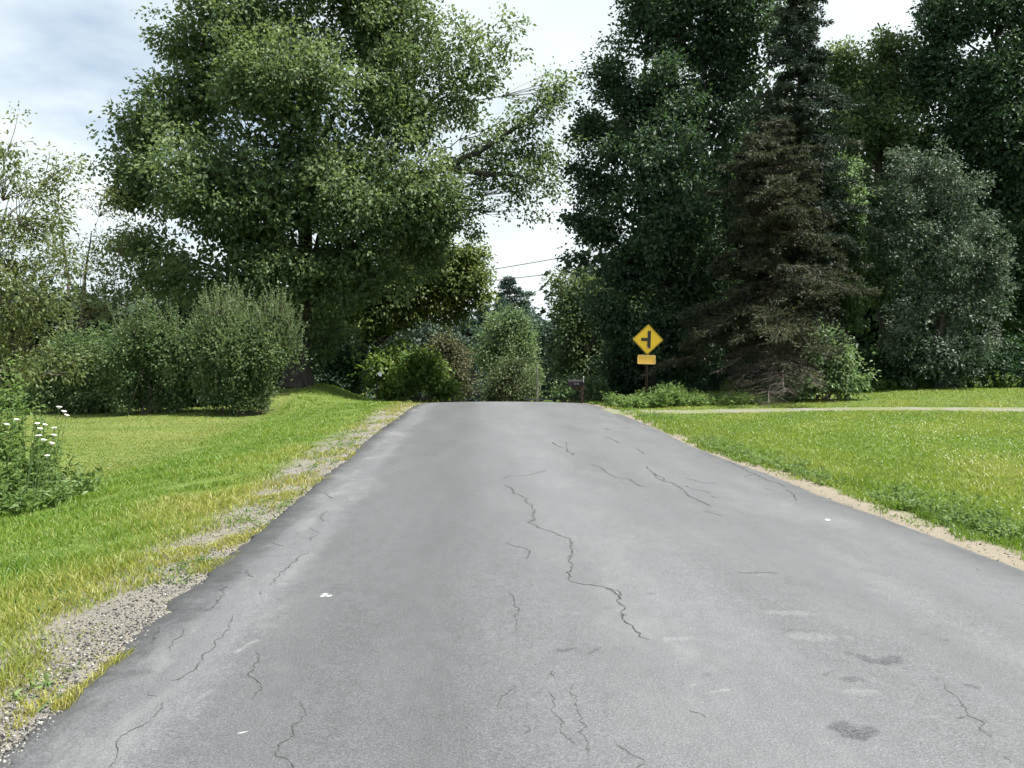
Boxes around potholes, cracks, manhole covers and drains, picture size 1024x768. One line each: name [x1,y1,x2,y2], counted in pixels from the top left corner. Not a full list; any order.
crack [503,470,649,640]
crack [108,692,163,768]
crack [592,451,721,516]
crack [550,671,590,751]
crack [245,515,323,594]
crack [176,586,233,680]
crack [275,705,306,768]
